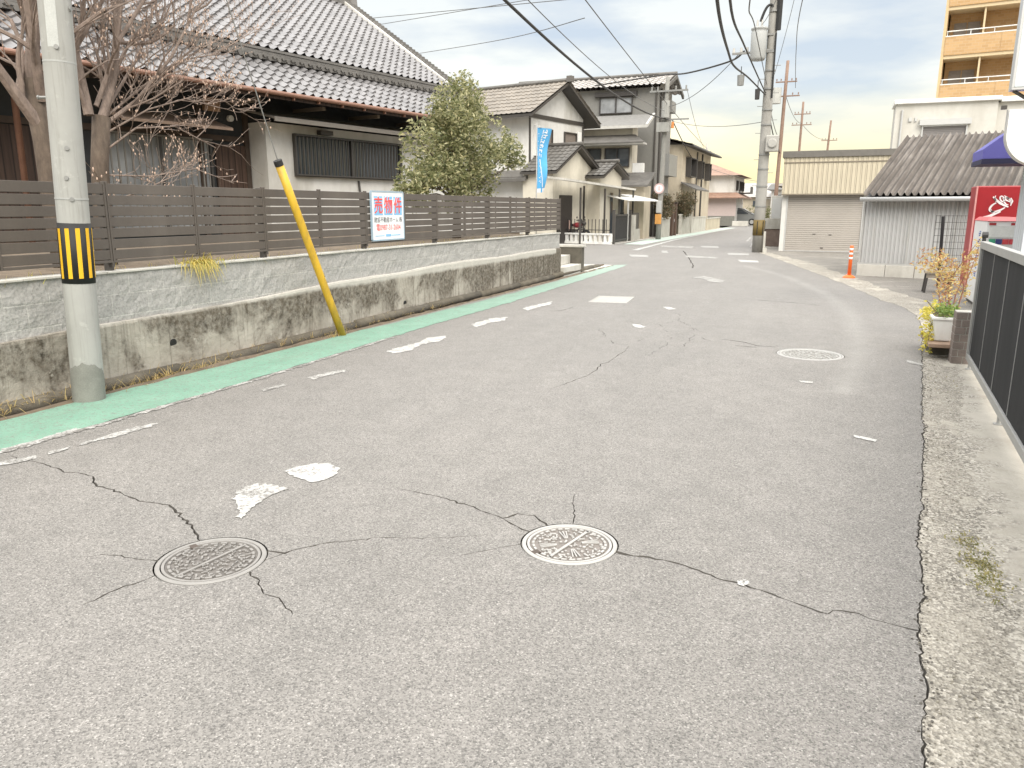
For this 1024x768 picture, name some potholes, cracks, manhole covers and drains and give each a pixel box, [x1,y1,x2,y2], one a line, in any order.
crack [248,488,548,614]
crack [85,554,159,604]
manhole cover [522,524,617,566]
crack [551,315,769,389]
crack [615,551,920,632]
manhole cover [154,538,267,585]
manhole cover [777,349,844,361]
crack [12,456,200,541]
